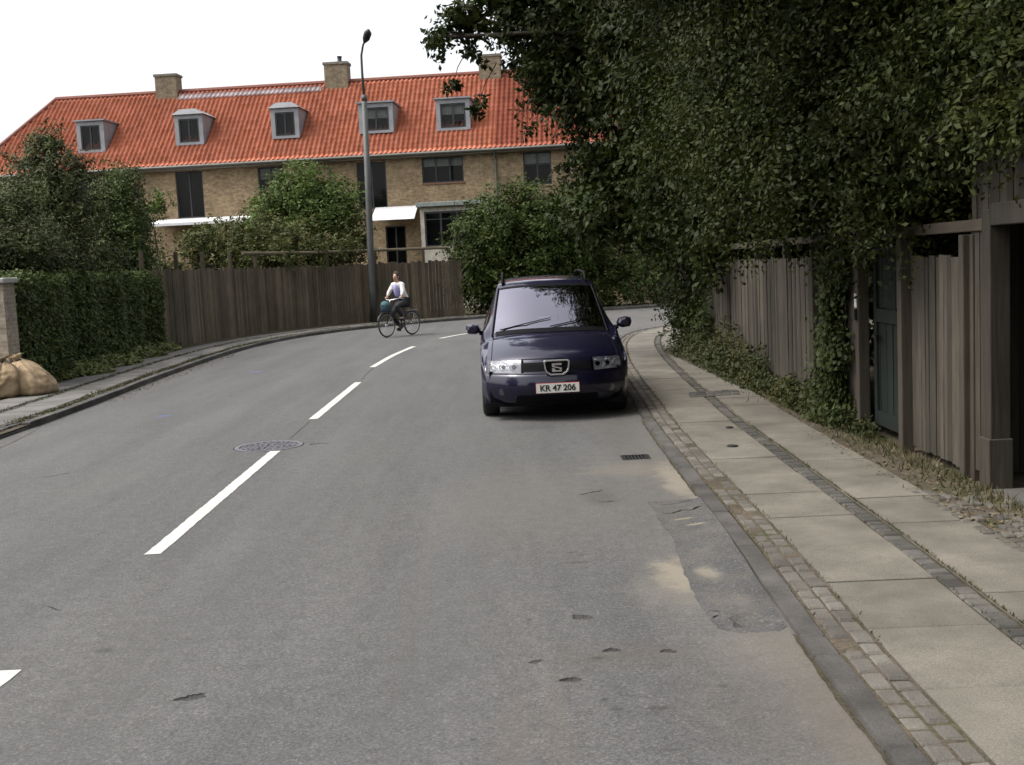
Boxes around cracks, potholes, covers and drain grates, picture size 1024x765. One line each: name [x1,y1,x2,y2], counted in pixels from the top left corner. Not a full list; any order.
pothole [172,693,206,701]
manhole cover [234,440,303,452]
